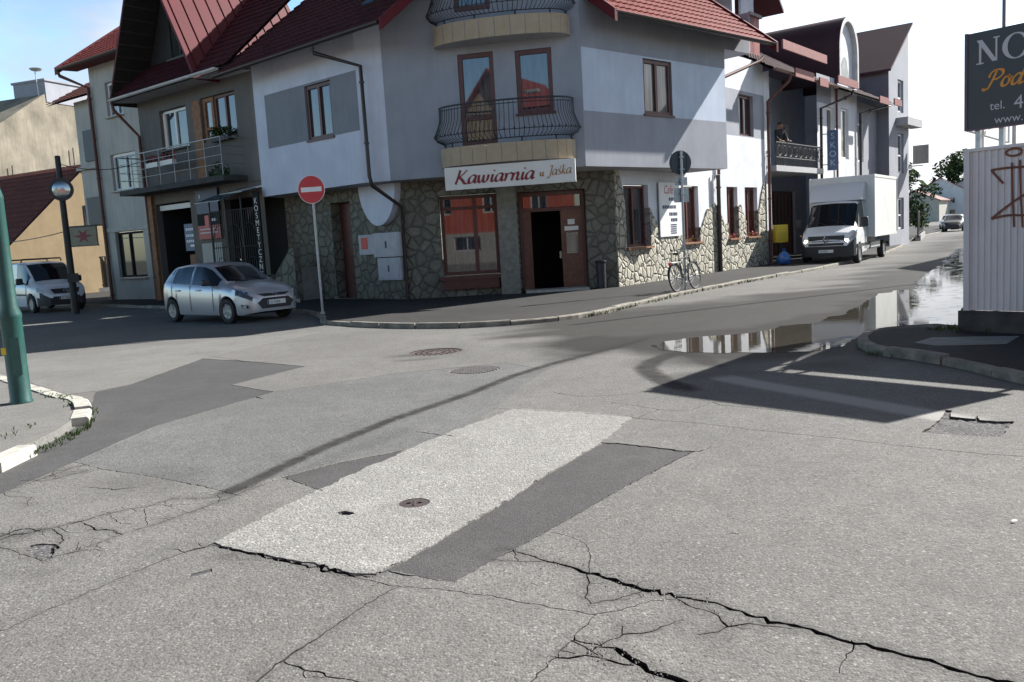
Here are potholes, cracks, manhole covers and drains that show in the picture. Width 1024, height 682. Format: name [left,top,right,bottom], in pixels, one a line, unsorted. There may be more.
manhole cover [399,498,430,508]
crack [0,462,273,561]
pothole [24,544,60,560]
crack [212,532,1013,682]
manhole cover [447,366,502,375]
pothole [922,410,1014,437]
